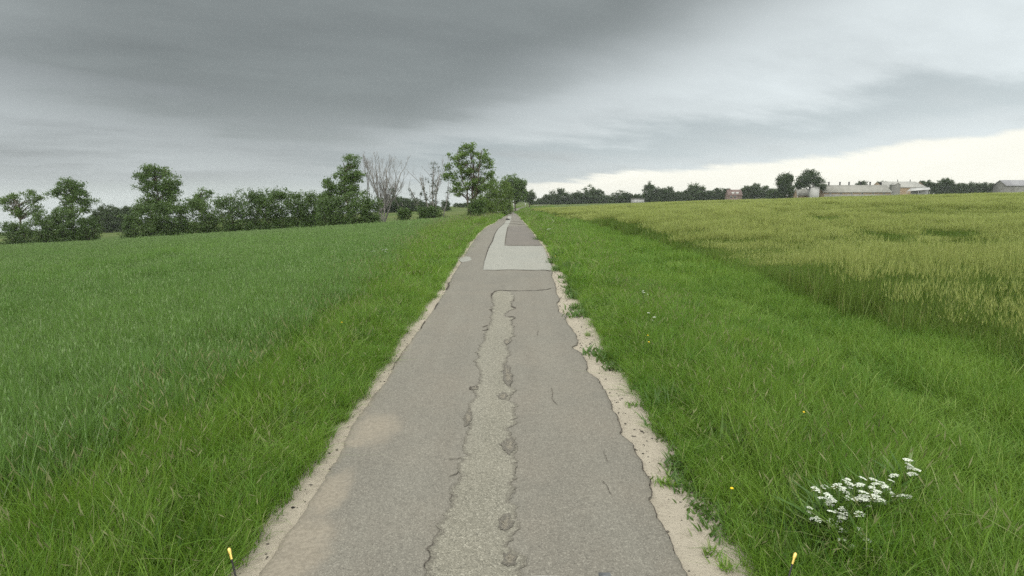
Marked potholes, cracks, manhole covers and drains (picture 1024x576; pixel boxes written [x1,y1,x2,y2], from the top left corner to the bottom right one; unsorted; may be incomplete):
pothole [500,437,516,455]
pothole [501,550,518,566]
pothole [503,363,512,386]
pothole [498,513,514,531]
crack [448,275,687,573]
